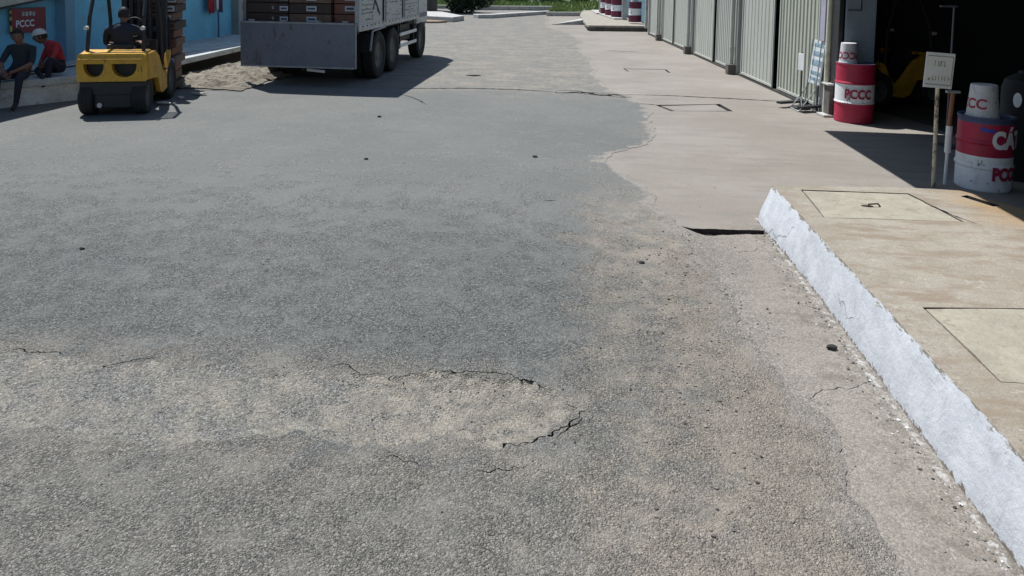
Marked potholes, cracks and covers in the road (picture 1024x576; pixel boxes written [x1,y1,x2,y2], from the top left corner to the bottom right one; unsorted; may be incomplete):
manhole cover [802,190,964,222]
manhole cover [923,307,1024,383]
